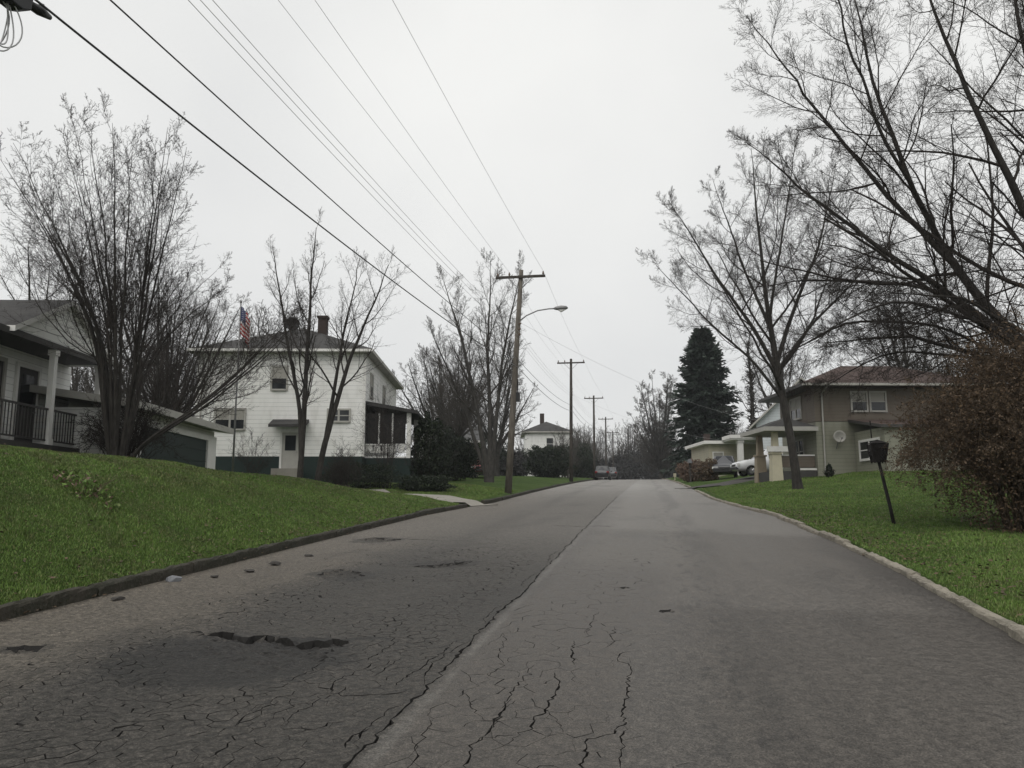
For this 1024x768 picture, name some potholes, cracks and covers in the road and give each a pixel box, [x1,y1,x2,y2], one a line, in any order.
pothole [413,560,474,568]
pothole [169,631,349,691]
pothole [317,569,365,581]
pothole [5,645,47,654]
crack [385,553,690,768]
